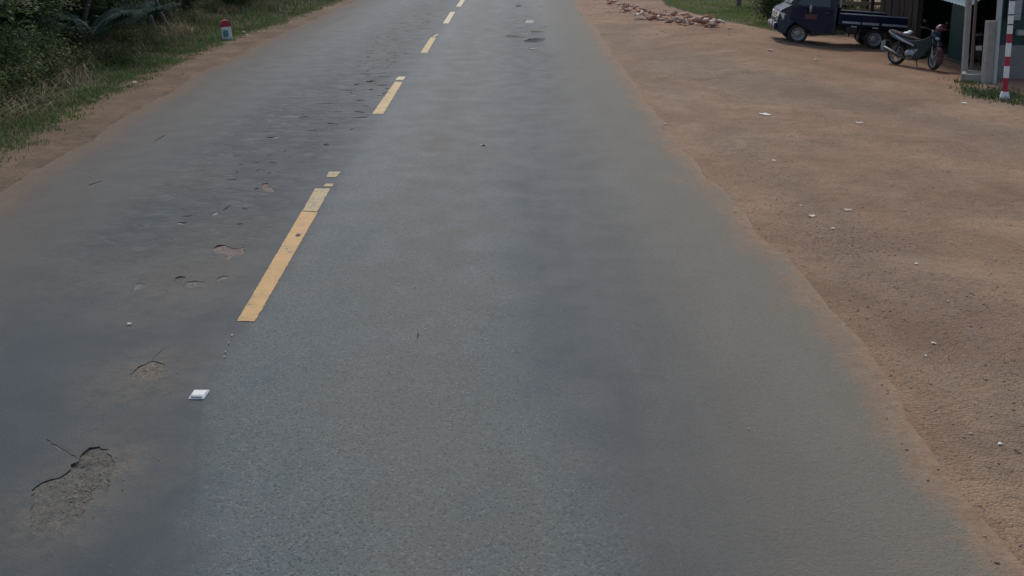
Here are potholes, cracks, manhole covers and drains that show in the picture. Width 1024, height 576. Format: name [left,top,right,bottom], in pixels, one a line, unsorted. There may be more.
pothole [29,447,115,534]
pothole [213,245,245,260]
pothole [130,361,165,379]
